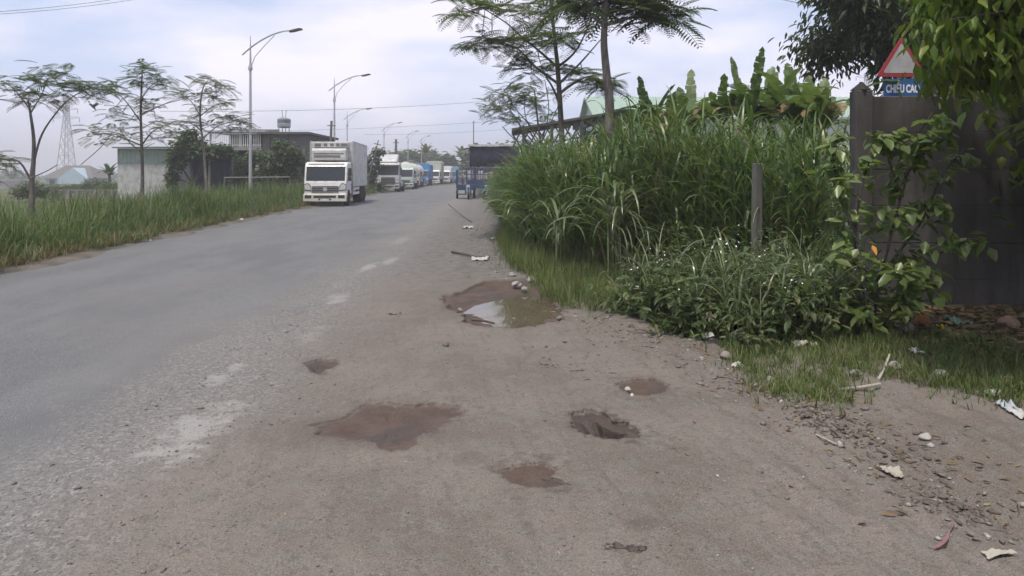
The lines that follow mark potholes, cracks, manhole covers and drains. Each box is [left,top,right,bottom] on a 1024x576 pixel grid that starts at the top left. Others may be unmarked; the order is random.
pothole [535,399,677,453]
pothole [425,276,584,334]
pothole [273,393,503,467]
